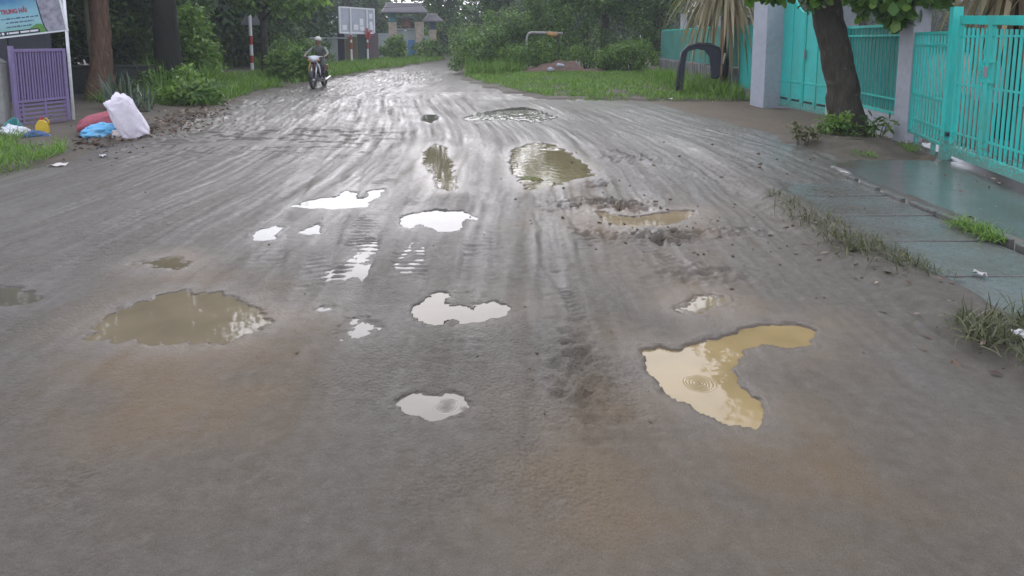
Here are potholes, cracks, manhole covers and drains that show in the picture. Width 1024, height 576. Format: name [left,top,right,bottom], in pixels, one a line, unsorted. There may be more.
pothole [121,252,196,273]
pothole [585,208,702,229]
pothole [391,207,484,234]
pothole [630,318,826,437]
pothole [461,106,559,123]
pothole [378,384,488,431]
pothole [68,286,278,354]
pothole [660,289,744,319]
pothole [417,114,443,123]
pothole [281,188,388,211]
pothole [0,282,53,311]
pothole [417,142,465,193]
